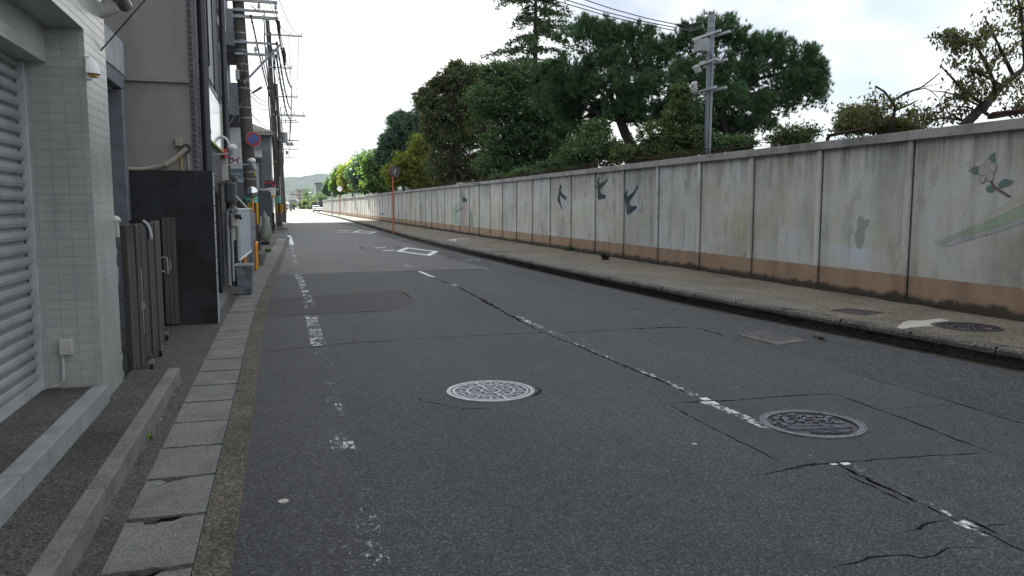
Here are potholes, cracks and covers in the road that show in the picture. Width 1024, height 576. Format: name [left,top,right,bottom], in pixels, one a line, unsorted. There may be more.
manhole cover [446,380,535,409]
manhole cover [759,409,868,439]
manhole cover [934,322,1004,337]
manhole cover [829,308,884,316]
crack [264,245,1024,568]
